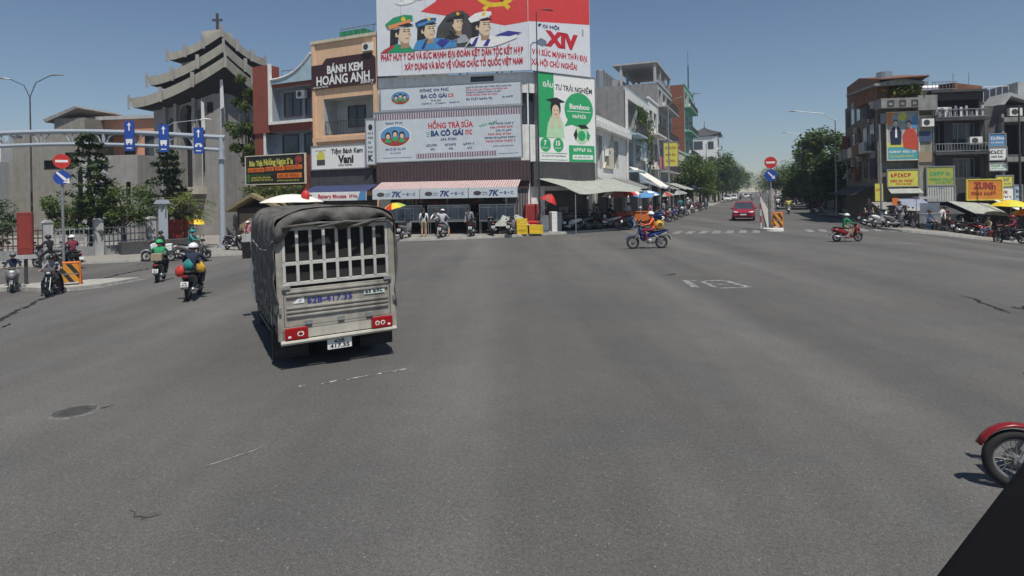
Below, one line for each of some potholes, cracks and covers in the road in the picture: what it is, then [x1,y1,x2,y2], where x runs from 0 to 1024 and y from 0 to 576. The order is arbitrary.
crack [964,296,1010,313]
manhole cover [46,404,102,420]
